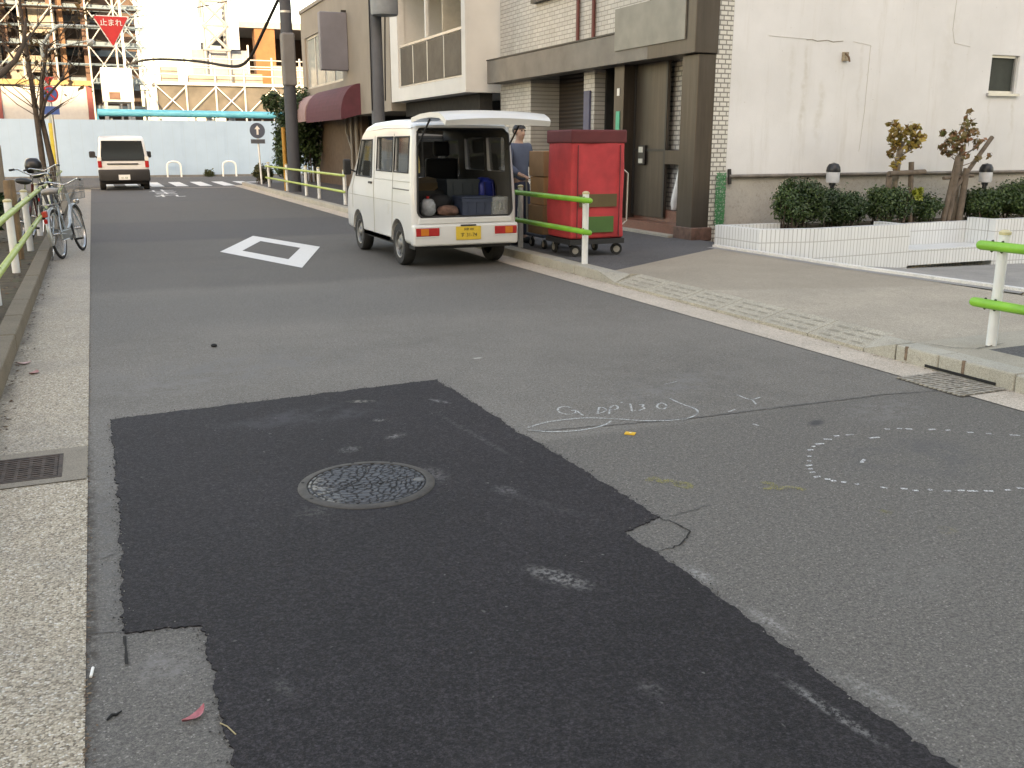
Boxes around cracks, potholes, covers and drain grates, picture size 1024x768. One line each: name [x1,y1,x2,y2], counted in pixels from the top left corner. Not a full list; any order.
drain grate [897,364,1006,397]
crack [657,505,709,552]
drain grate [0,446,87,489]
manhole cover [298,461,435,510]
